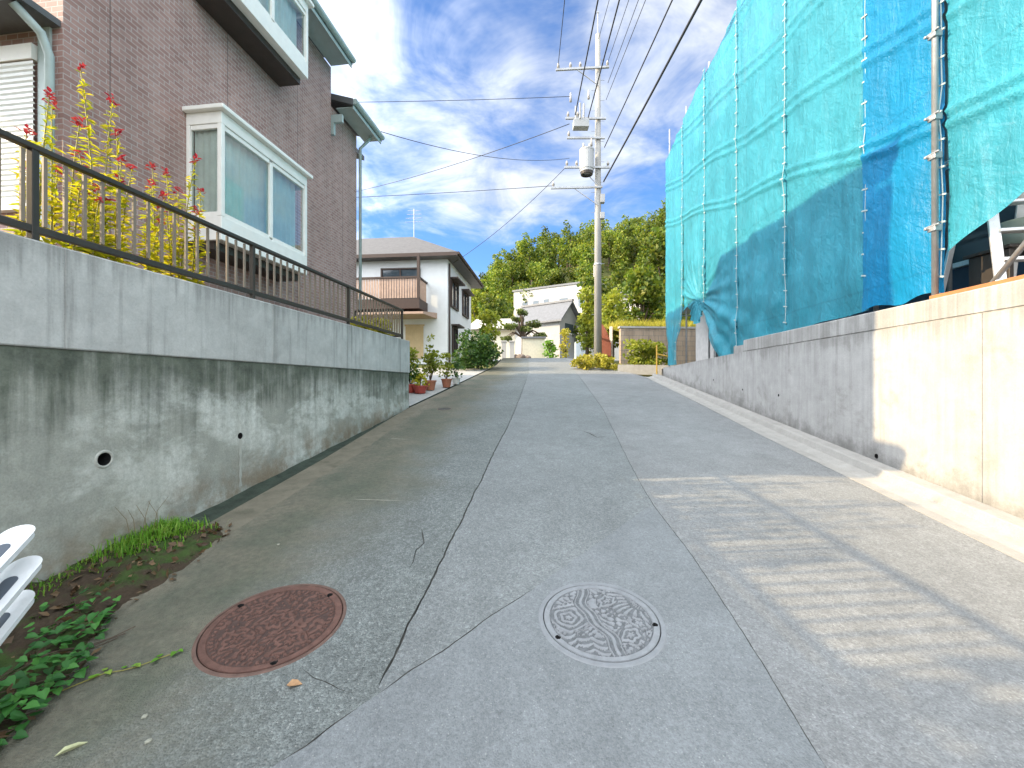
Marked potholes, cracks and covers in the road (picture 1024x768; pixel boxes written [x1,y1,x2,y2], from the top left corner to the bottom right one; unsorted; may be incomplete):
crack [358,379,527,687]
manhole cover [538,582,667,668]
manhole cover [191,584,347,678]
